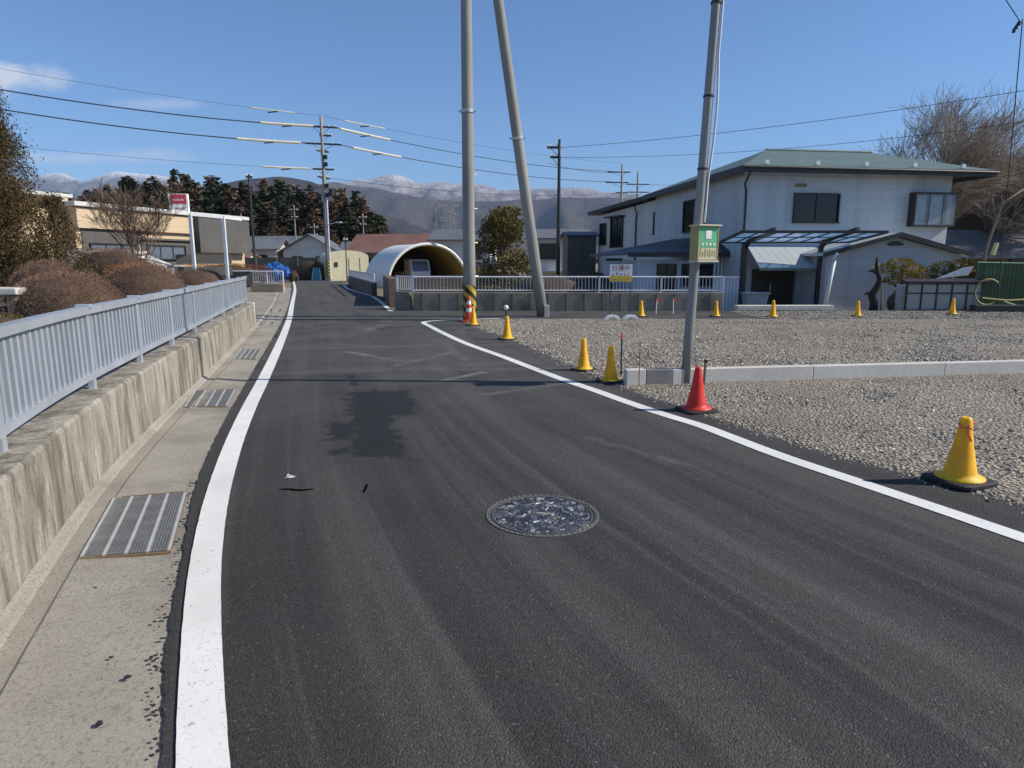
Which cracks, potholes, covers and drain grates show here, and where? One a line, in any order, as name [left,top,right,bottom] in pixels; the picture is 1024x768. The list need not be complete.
drain grate [78,491,187,559]
drain grate [184,389,236,408]
drain grate [232,349,262,360]
manhole cover [486,494,599,537]
